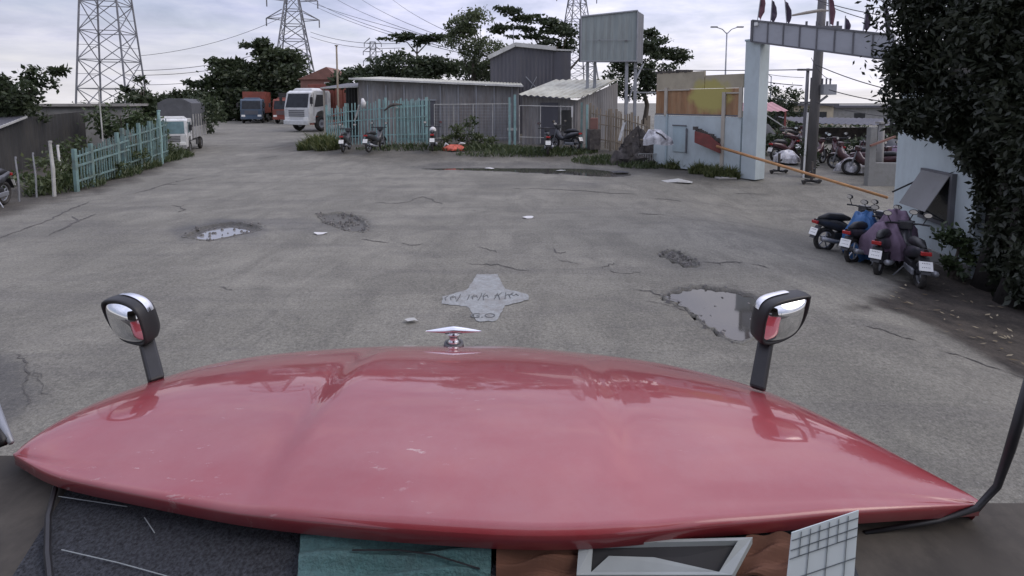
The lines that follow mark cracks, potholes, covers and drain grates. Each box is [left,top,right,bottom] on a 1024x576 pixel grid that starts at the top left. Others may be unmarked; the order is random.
pothole [315,211,370,233]
pothole [658,248,701,268]
crack [2,202,95,237]
pothole [181,221,265,241]
pothole [660,283,760,345]
crack [17,354,51,409]
